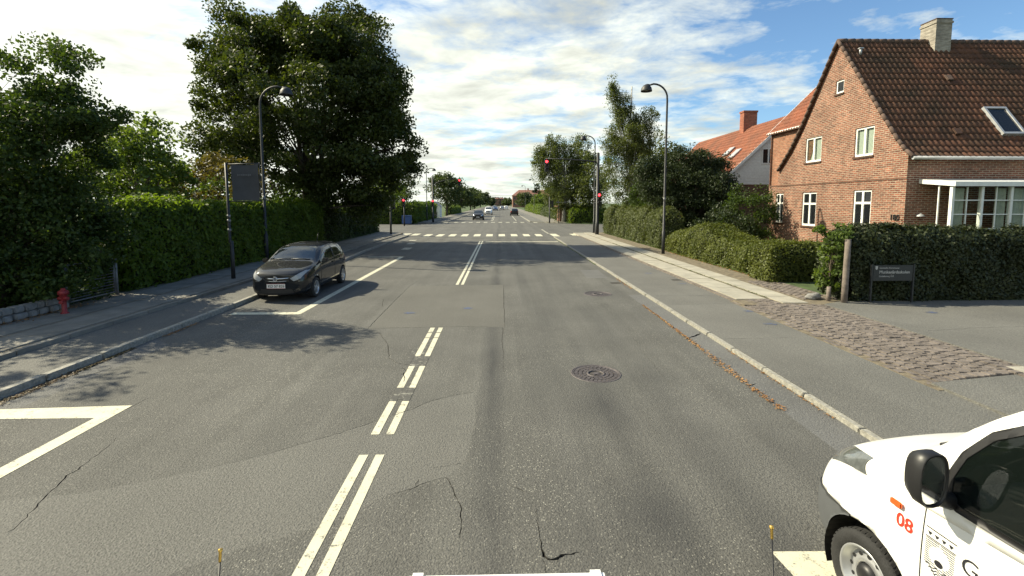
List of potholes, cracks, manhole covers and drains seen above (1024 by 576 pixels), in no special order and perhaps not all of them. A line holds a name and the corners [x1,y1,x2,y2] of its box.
manhole cover [571,365,622,383]
crack [393,463,462,534]
crack [6,438,116,533]
